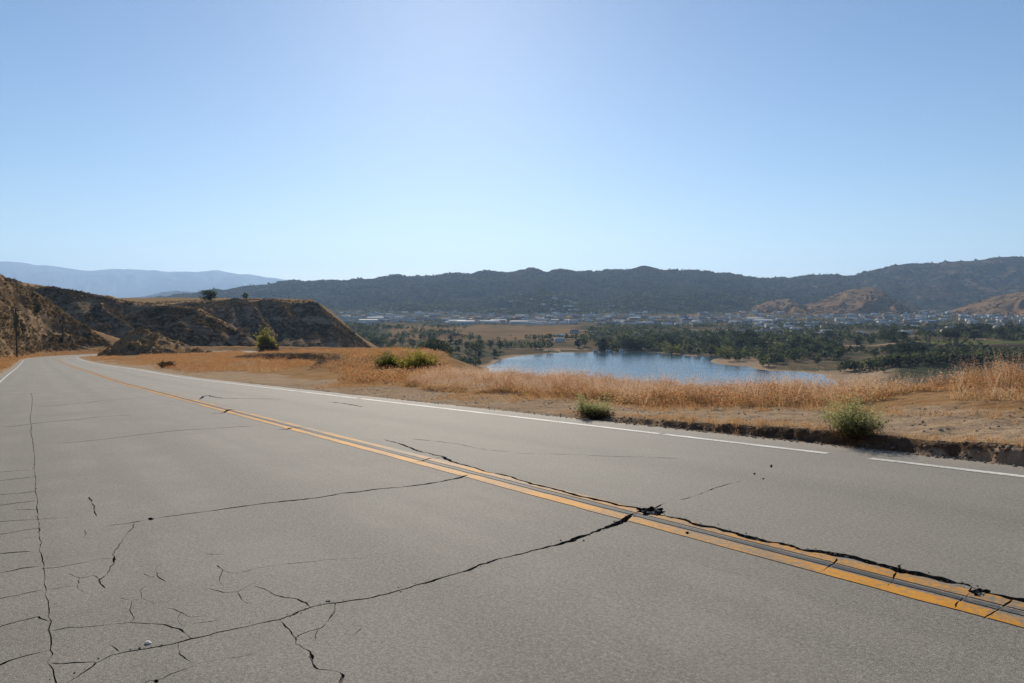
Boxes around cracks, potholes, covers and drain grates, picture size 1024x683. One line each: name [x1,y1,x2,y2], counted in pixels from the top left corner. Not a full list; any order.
crack [0,394,1024,683]
